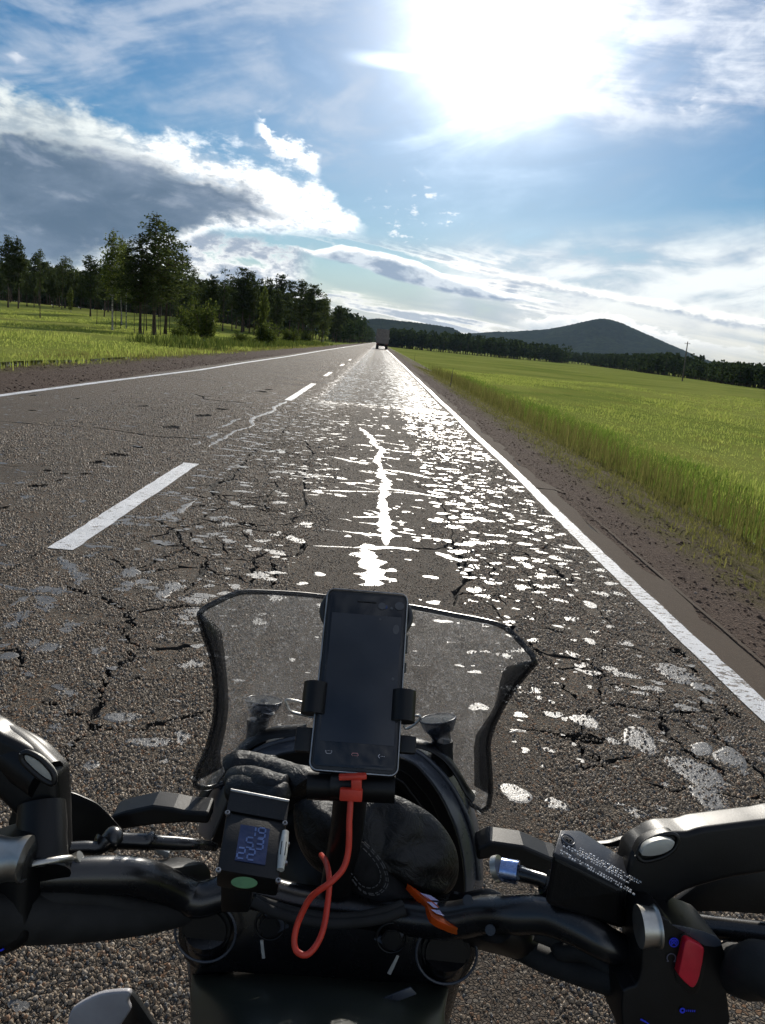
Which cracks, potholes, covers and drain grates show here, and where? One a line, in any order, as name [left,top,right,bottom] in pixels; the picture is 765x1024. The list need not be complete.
crack [61,412,325,762]
crack [0,648,27,669]
crack [394,464,765,799]
